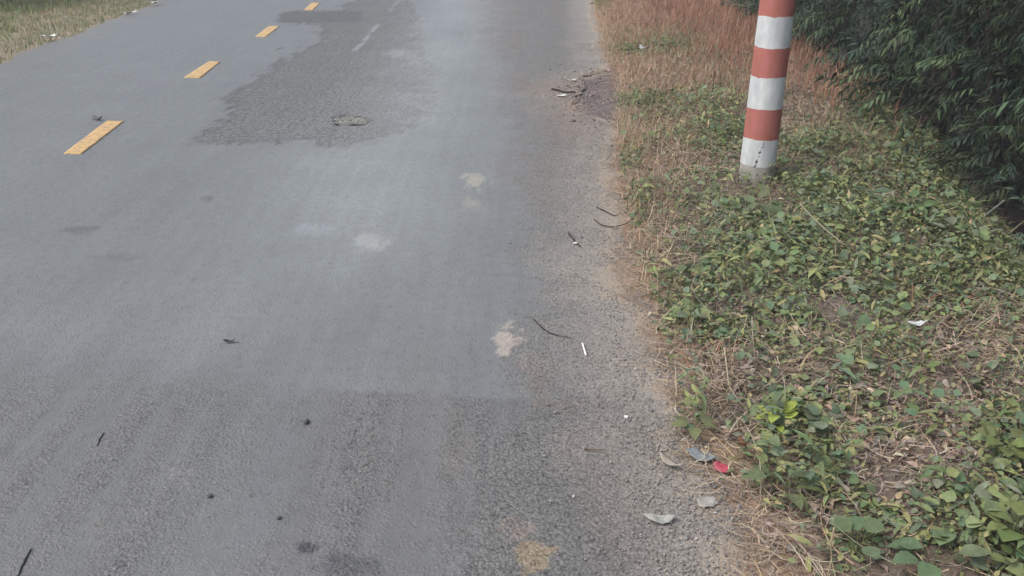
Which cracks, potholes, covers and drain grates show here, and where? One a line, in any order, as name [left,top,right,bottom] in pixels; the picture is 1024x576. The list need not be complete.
pothole [328,114,374,126]
